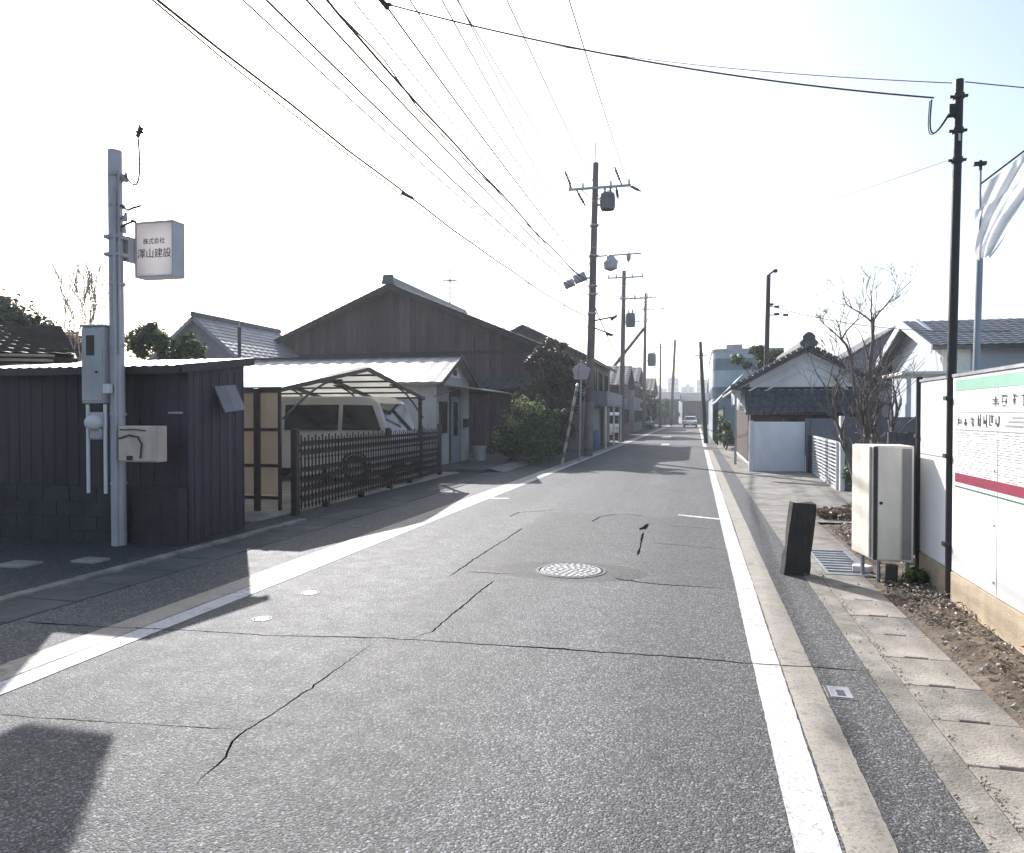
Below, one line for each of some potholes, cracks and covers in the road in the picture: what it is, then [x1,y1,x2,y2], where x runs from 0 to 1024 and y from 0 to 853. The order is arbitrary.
crack [30,510,862,671]
drain grate [811,549,873,578]
crack [0,643,374,786]
manhole cover [535,563,607,579]
manhole cover [822,685,859,701]
